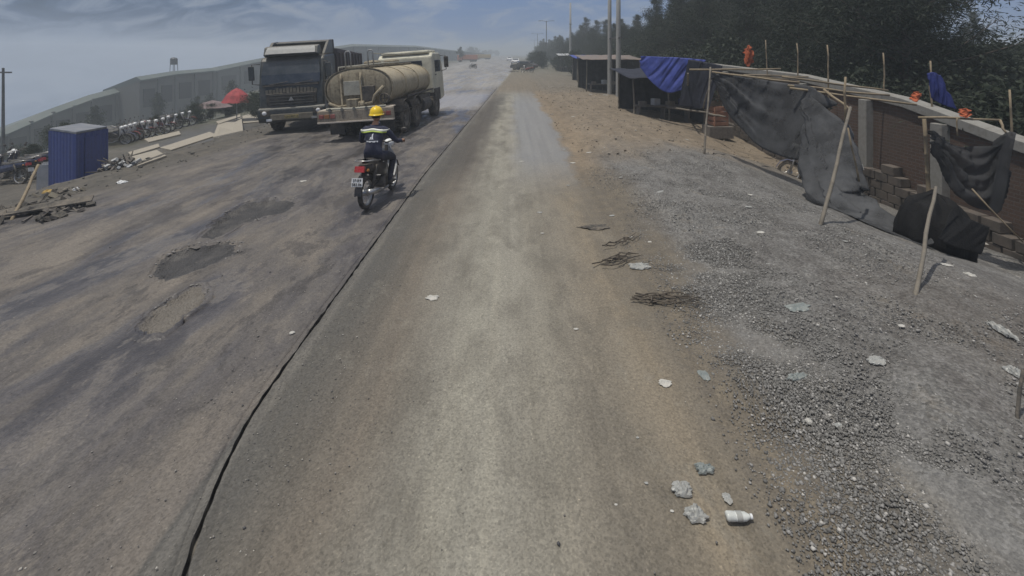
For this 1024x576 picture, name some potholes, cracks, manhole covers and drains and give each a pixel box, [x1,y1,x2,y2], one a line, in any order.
pothole [126,280,215,342]
pothole [136,239,248,287]
pothole [186,194,309,249]
